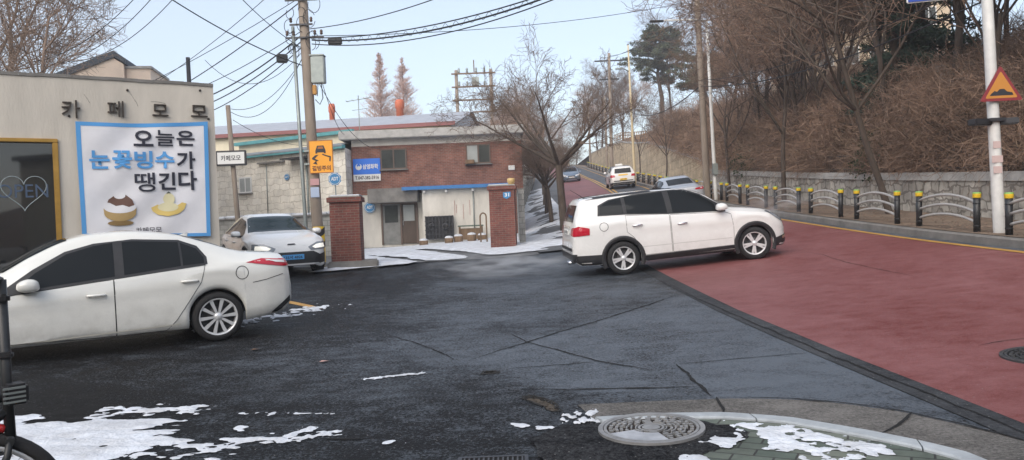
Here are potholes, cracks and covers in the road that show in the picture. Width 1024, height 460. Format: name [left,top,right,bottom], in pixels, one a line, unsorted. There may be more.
pothole [520,394,562,412]
manhole cover [999,346,1024,364]
crack [381,298,666,371]
manhole cover [598,413,705,446]
crack [522,284,1024,432]
